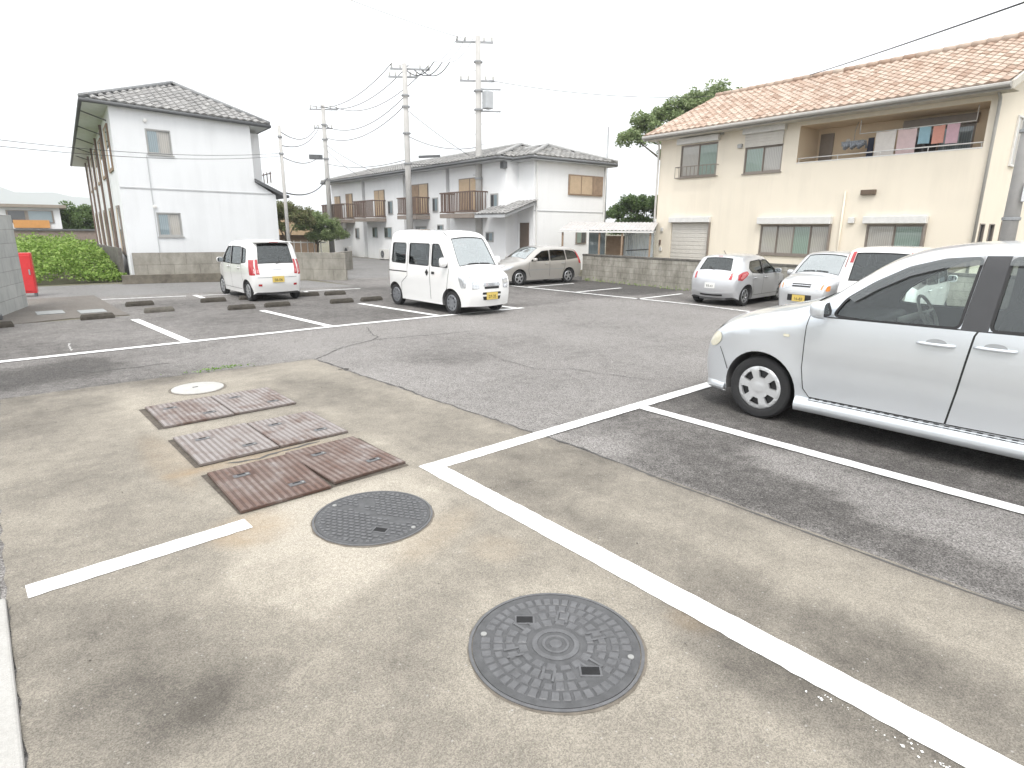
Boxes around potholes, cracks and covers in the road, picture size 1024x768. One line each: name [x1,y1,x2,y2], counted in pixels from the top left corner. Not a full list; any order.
manhole cover [211,387,296,415]
manhole cover [311,491,435,547]
manhole cover [145,396,234,428]
manhole cover [285,436,405,484]
manhole cover [467,593,647,715]
manhole cover [173,423,279,466]
crack [316,328,467,359]
manhole cover [207,454,332,514]
manhole cover [168,382,227,395]
manhole cover [247,411,348,448]
